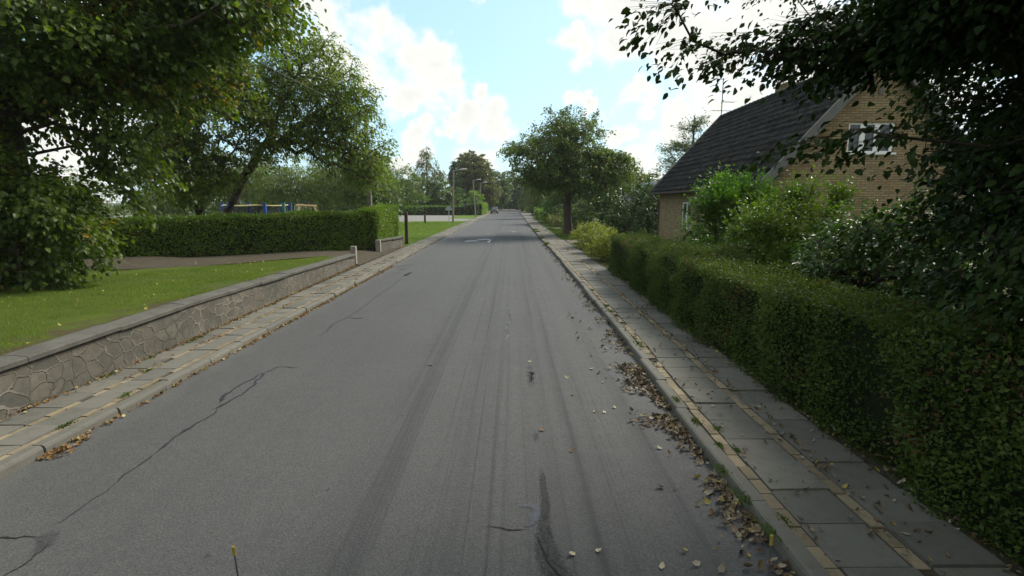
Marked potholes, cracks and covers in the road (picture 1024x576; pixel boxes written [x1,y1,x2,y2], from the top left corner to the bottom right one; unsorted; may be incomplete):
crack [319,264,413,336]
crack [491,473,573,576]
crack [0,535,48,575]
